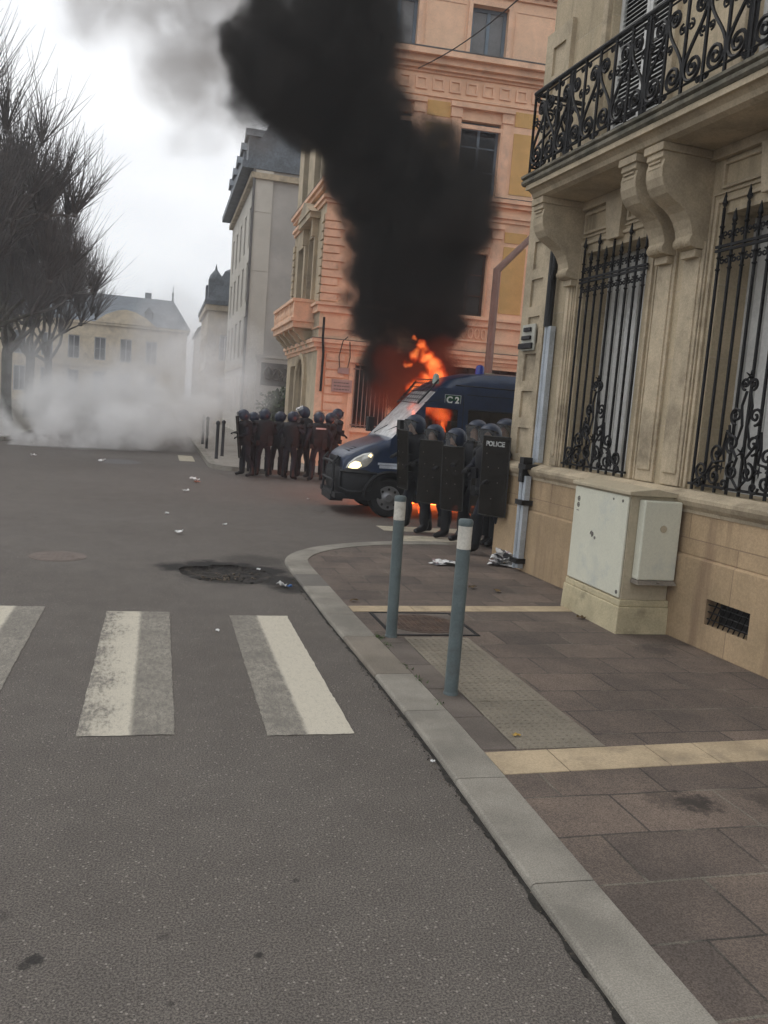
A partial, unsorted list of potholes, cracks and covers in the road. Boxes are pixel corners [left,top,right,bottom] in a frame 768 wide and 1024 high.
manhole cover [369,612,480,636]
pothole [179,565,273,584]
manhole cover [29,551,87,561]
